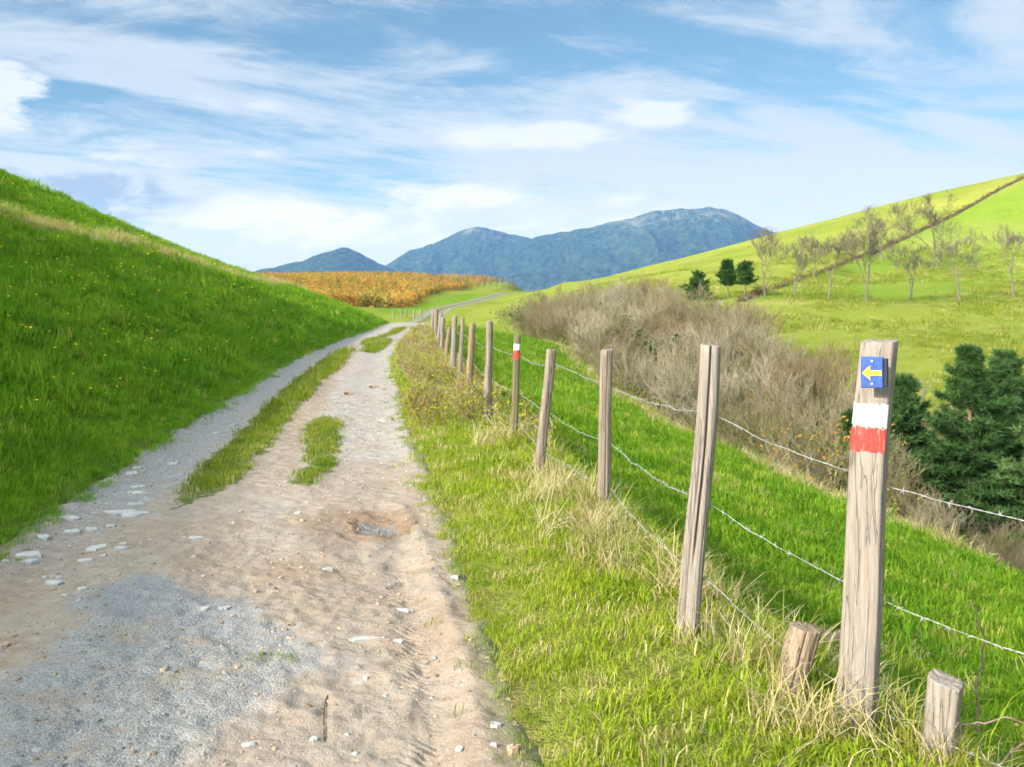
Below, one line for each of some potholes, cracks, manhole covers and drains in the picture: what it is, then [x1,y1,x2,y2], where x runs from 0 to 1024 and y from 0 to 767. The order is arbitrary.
pothole [343,515,418,540]
